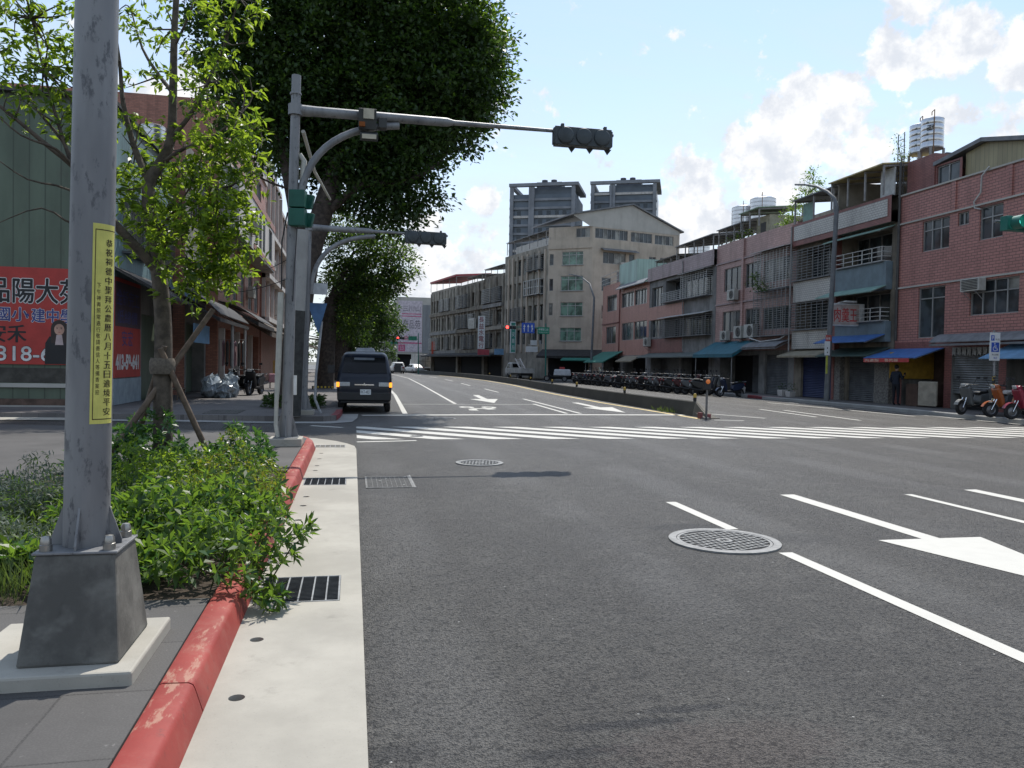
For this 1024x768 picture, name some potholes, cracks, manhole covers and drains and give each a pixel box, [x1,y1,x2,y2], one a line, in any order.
drain grate [303,477,346,485]
manhole cover [669,528,782,555]
drain grate [254,575,341,604]
